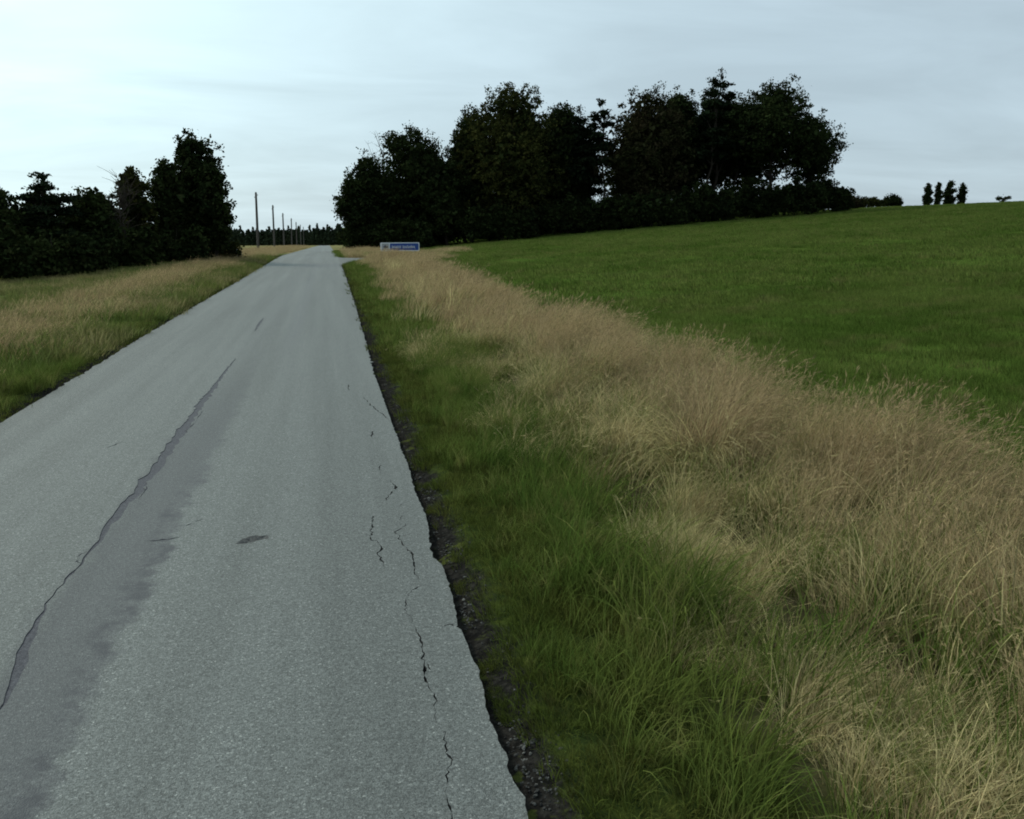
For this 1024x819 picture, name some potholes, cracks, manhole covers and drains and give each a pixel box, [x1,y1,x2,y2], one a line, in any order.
pothole [236,535,271,544]
crack [370,464,458,819]
crack [0,358,236,709]
